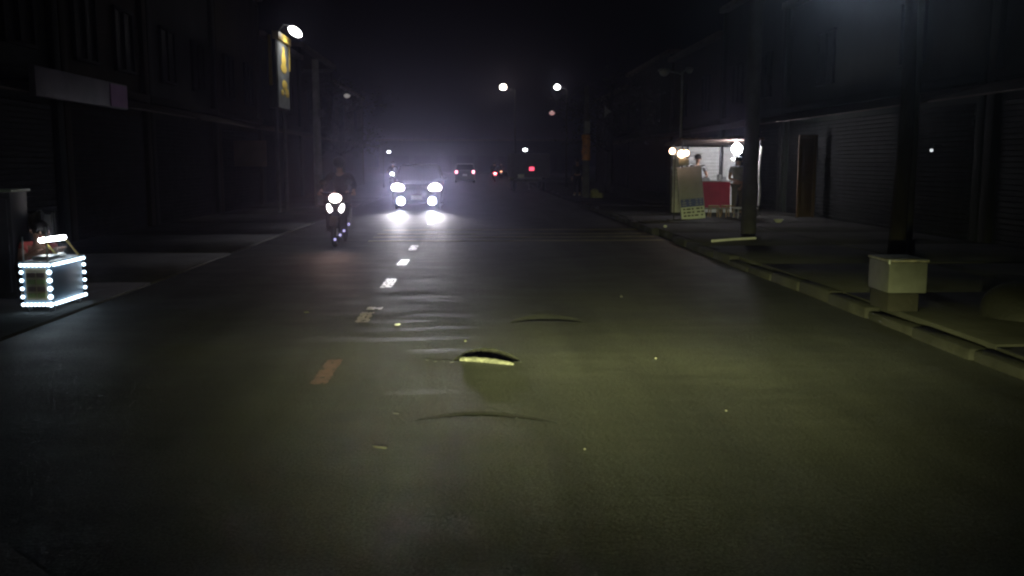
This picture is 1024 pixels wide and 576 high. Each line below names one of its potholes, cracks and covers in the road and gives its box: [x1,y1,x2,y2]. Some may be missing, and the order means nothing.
pothole [511,314,583,323]
pothole [420,348,521,362]
